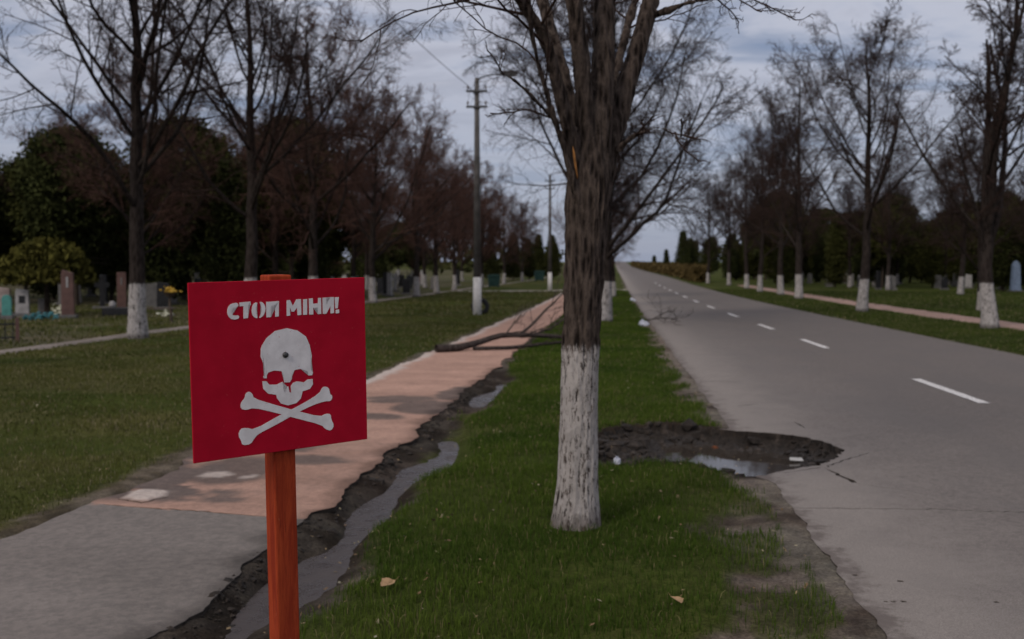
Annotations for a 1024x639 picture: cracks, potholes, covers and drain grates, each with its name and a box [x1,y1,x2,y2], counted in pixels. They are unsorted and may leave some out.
pothole [598,423,840,477]
